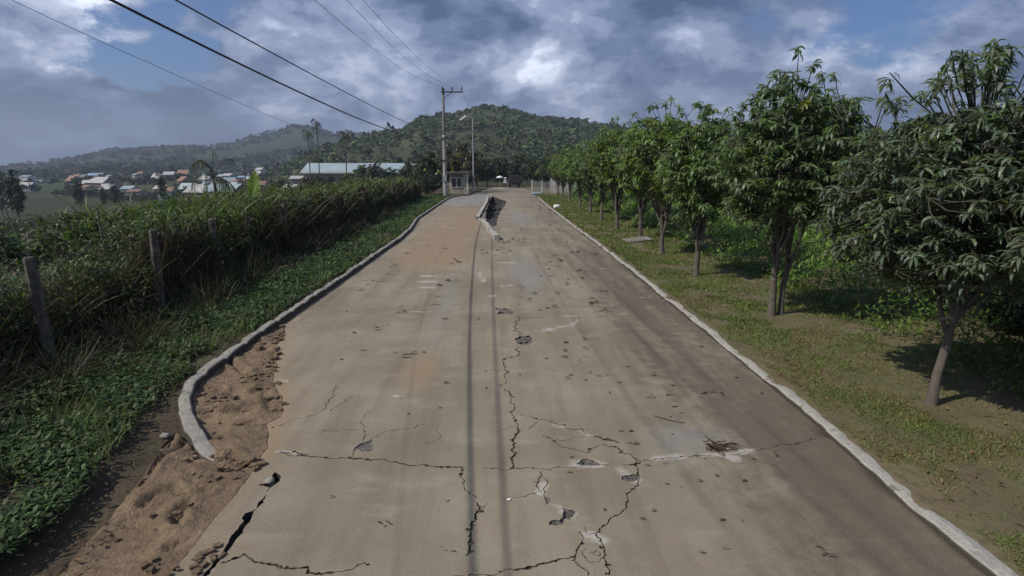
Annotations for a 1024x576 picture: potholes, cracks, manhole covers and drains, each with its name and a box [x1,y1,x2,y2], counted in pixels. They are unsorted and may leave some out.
pothole [549,508,576,526]
pothole [353,440,373,452]
crack [277,317,816,576]
crack [220,553,371,575]
pothole [485,196,507,227]
